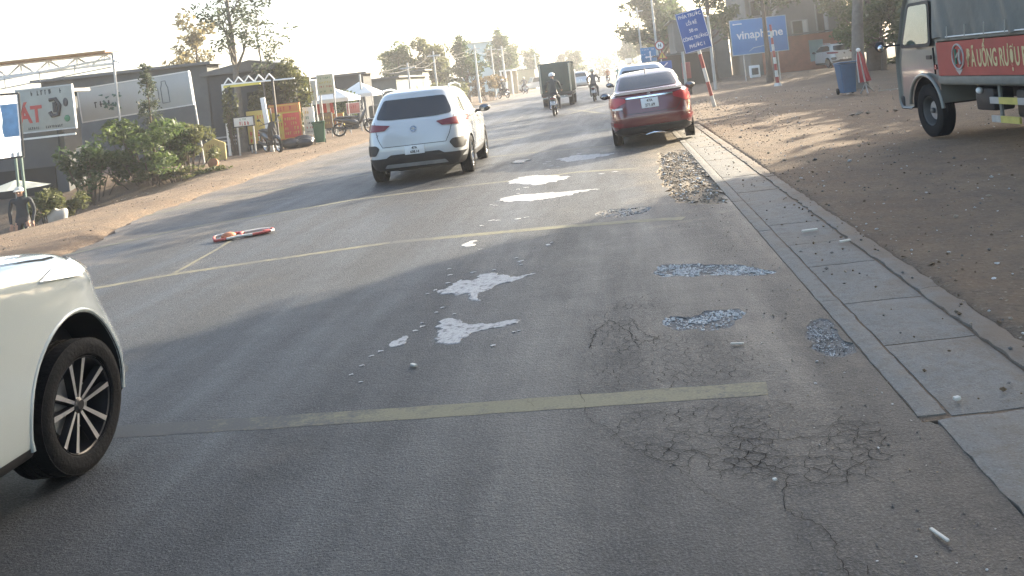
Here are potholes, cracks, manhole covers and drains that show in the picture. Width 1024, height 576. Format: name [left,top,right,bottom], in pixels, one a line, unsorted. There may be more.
pothole [655,150,729,205]
pothole [804,318,856,358]
pothole [662,308,746,331]
pothole [651,263,777,277]
pothole [595,206,653,218]
crack [584,291,765,390]
crack [527,389,893,576]
